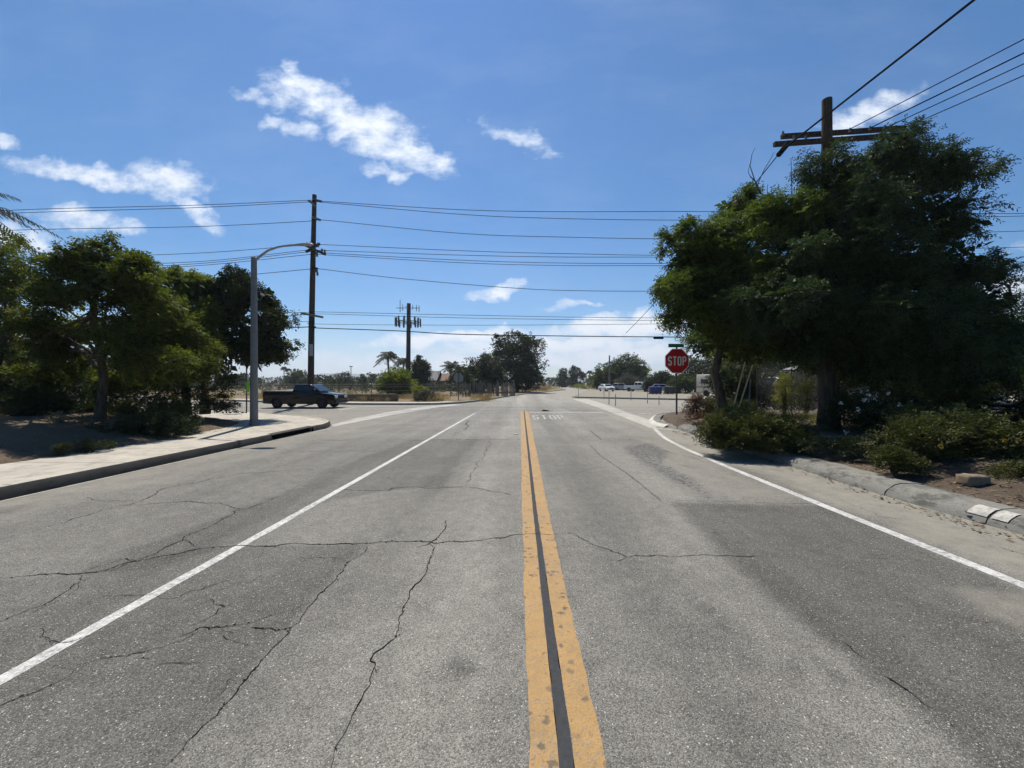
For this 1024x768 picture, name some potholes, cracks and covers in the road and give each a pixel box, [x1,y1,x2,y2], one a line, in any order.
crack [746,575,953,726]
drain grate [268,426,313,439]
crack [577,535,774,561]
crack [0,440,567,768]
